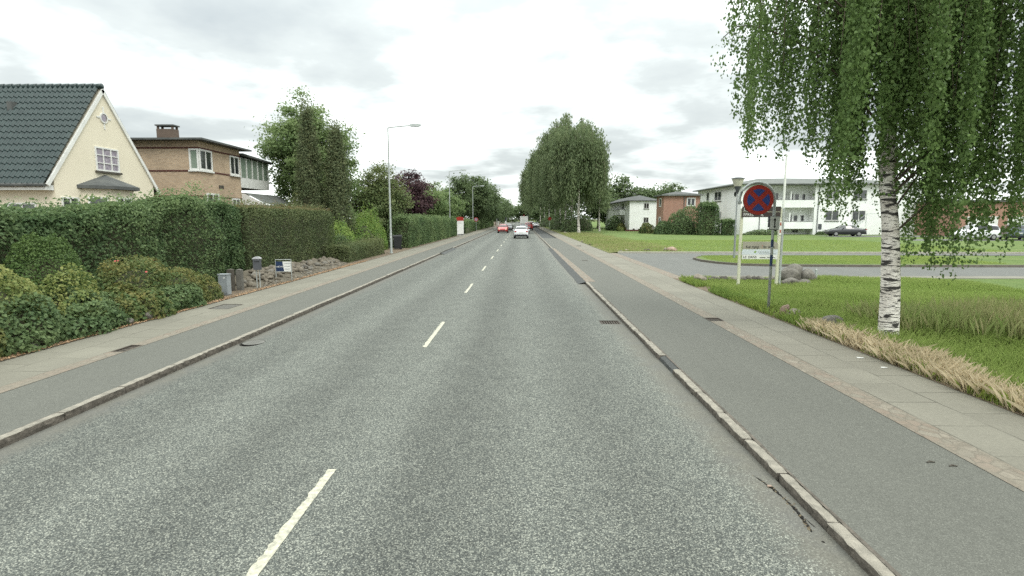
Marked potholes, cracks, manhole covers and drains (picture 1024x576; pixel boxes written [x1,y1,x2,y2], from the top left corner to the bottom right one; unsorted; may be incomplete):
crack [754,476,825,543]
